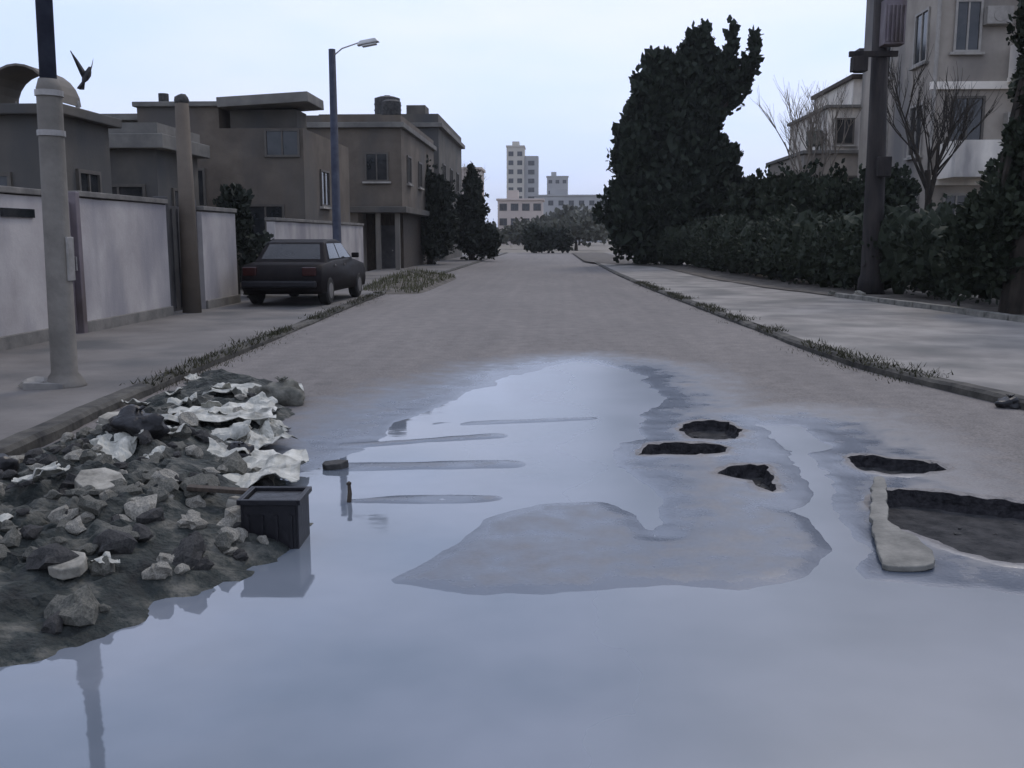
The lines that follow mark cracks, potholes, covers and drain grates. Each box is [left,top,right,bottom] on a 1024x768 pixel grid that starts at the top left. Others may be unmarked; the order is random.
pothole [671,419,752,442]
pothole [840,453,957,478]
pothole [633,441,737,458]
pothole [706,462,786,493]
pothole [858,487,1024,569]
